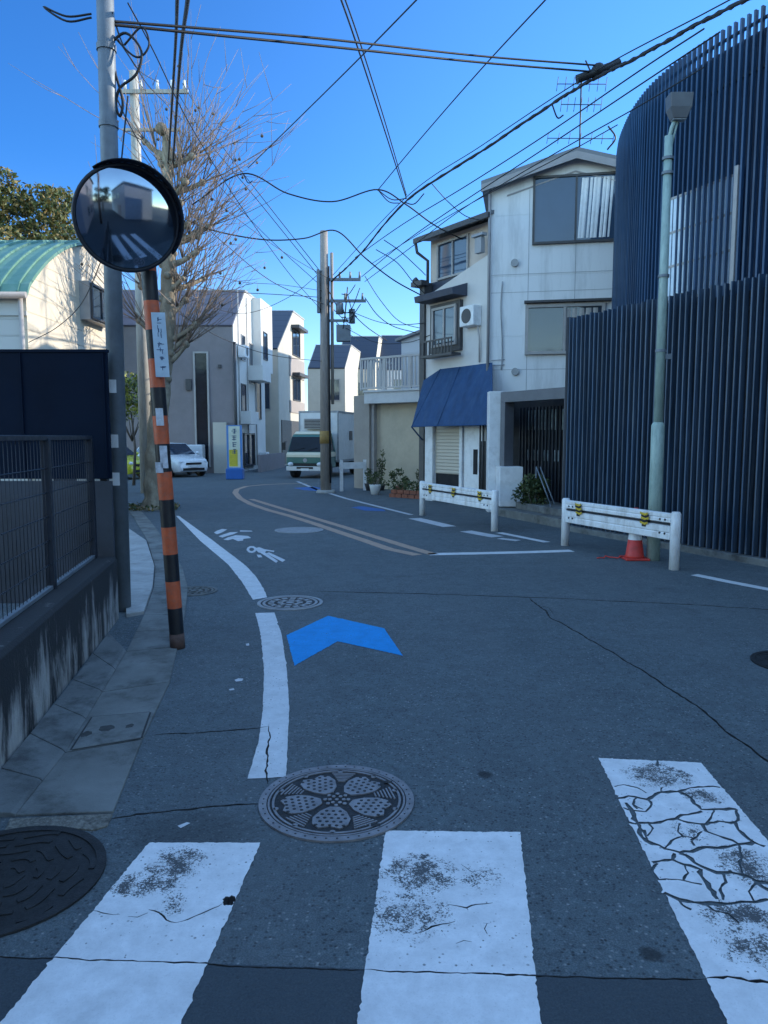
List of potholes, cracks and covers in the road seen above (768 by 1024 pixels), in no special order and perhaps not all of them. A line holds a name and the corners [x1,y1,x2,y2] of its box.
manhole cover [187,586,217,596]
manhole cover [750,651,768,669]
manhole cover [0,825,107,937]
crack [156,727,271,784]
crack [530,599,768,923]
manhole cover [257,595,323,611]
manhole cover [258,765,414,843]
